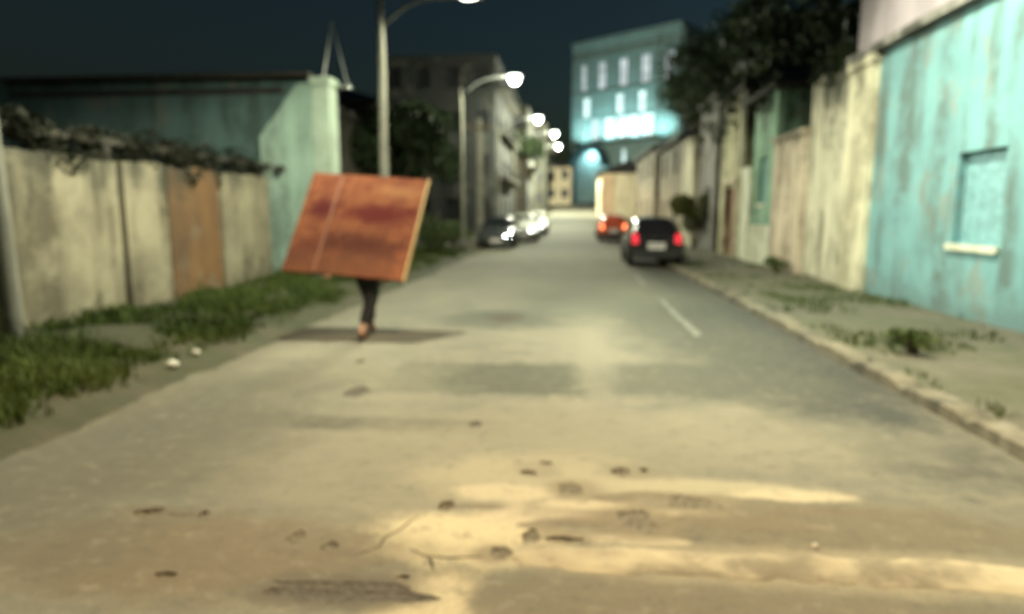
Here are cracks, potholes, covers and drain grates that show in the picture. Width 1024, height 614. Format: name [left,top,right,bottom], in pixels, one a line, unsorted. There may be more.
pothole [490,546,513,559]
pothole [557,483,583,495]
pothole [616,510,659,534]
pothole [522,529,540,543]
pothole [610,468,631,477]
pothole [285,530,306,545]
pothole [667,495,723,509]
pothole [155,571,177,579]
pothole [342,386,371,397]
pothole [438,500,456,512]
crack [352,514,483,569]
pothole [132,507,165,517]
